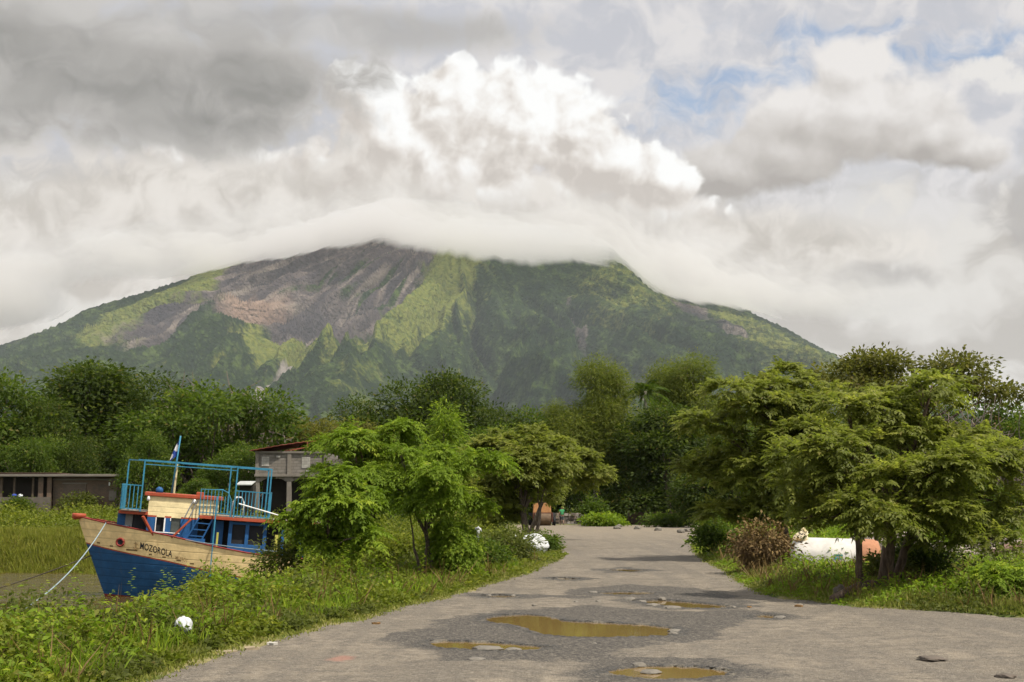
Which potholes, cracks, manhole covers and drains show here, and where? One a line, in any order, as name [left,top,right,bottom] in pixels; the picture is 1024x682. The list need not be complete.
pothole [634,598,737,609]
pothole [419,639,559,651]
pothole [596,664,740,680]
pothole [476,613,685,638]
